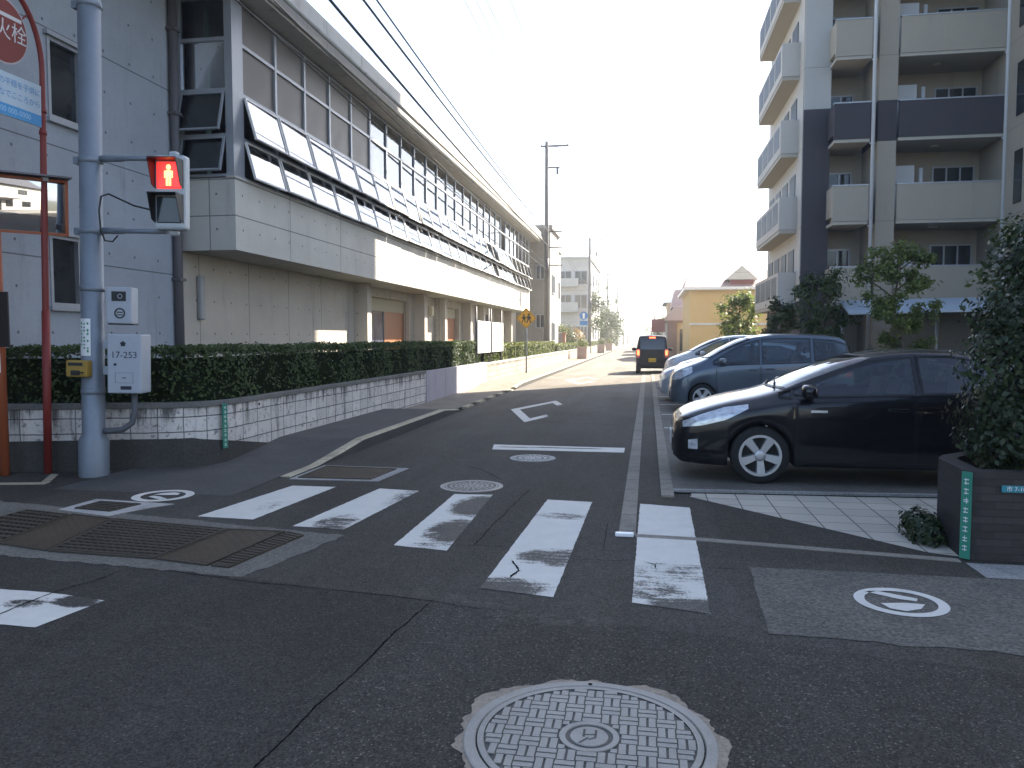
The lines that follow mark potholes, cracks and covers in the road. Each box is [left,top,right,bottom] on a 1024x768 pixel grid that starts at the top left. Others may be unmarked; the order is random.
drain grate [211,531,304,568]
crack [168,570,480,768]
drain grate [155,528,285,566]
drain grate [298,466,397,480]
manhole cover [440,480,503,493]
drain grate [75,501,141,512]
drain grate [47,518,229,559]
drain grate [0,509,68,542]
manhole cover [510,454,556,462]
manhole cover [451,679,732,768]
